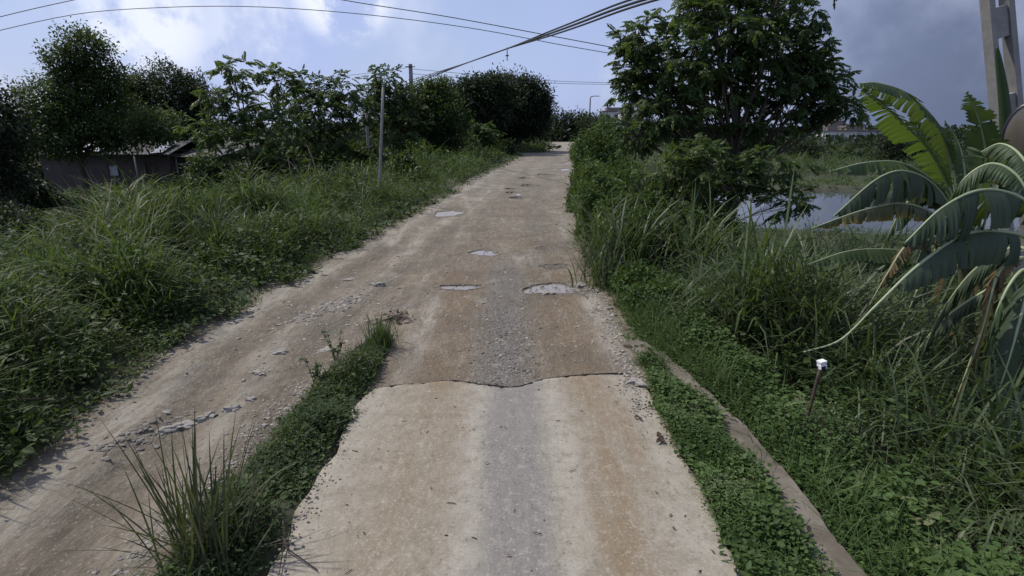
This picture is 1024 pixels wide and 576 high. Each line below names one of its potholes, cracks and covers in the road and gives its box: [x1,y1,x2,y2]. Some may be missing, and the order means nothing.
pothole [519,282,591,294]
